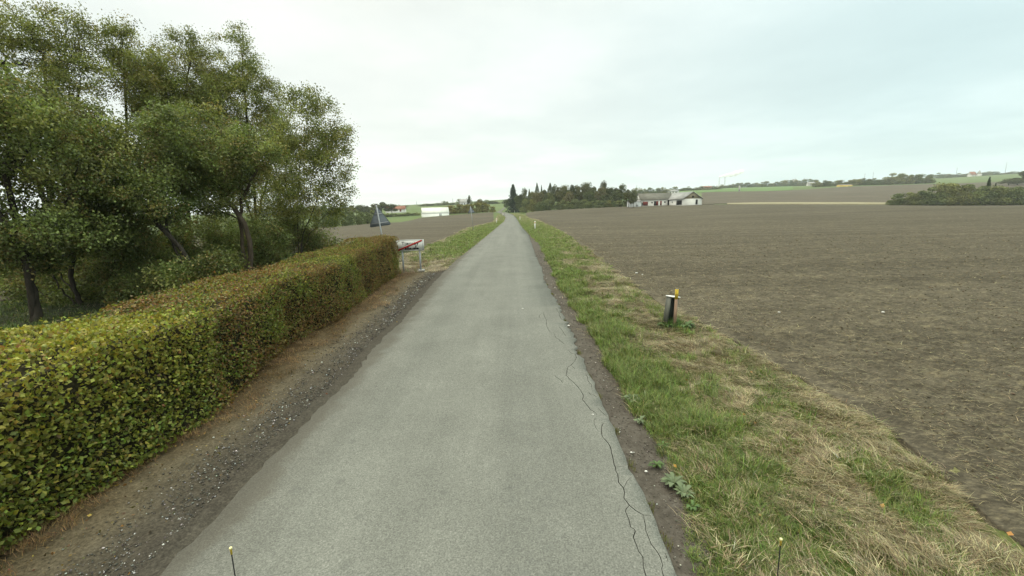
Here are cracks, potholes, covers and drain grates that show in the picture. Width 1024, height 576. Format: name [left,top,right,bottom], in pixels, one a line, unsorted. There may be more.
crack [539,313,668,576]
